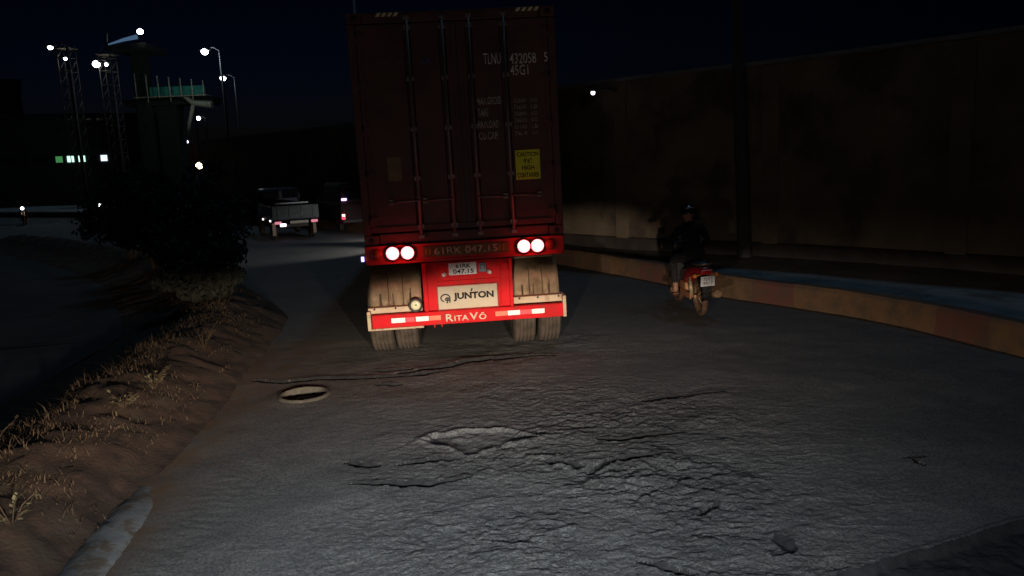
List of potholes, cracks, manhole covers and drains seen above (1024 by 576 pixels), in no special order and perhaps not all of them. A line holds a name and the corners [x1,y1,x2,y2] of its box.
crack [693,500,721,516]
crack [545,431,686,475]
crack [252,354,556,387]
pothole [768,533,799,557]
pothole [419,427,539,455]
crack [344,455,471,488]
manhole cover [277,386,331,403]
crack [904,455,926,466]
crack [636,561,698,576]
crack [640,390,727,402]
